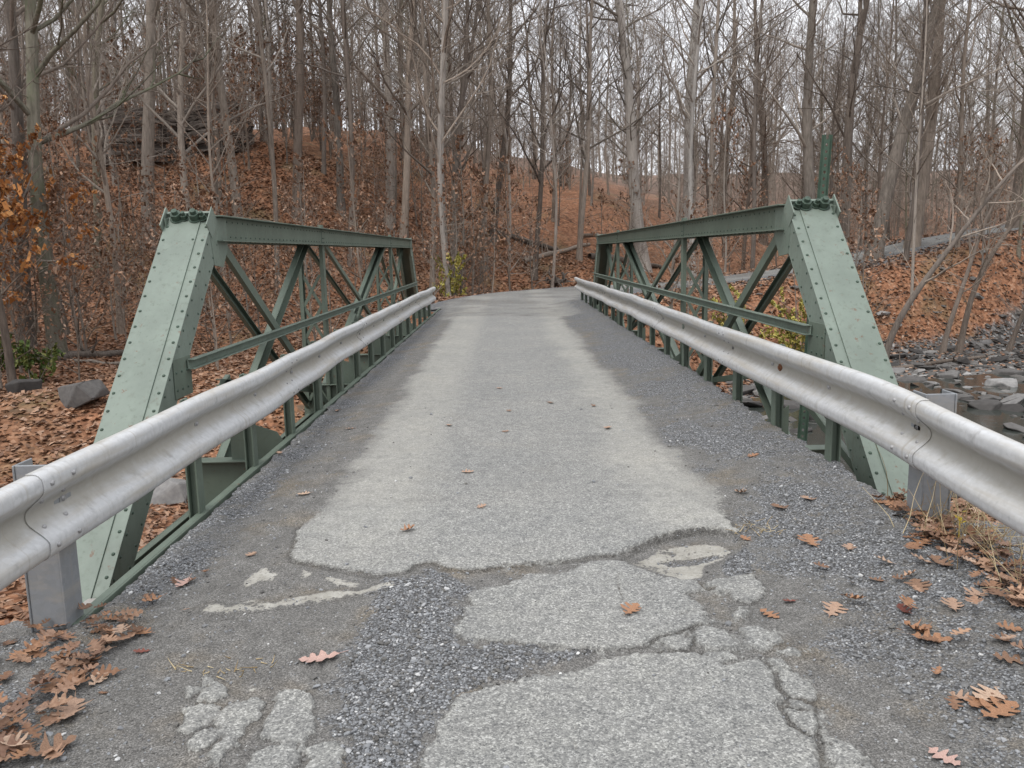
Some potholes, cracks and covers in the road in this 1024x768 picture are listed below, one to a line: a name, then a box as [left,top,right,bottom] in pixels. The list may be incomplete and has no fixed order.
crack [168,673,313,768]
pothole [620,527,746,582]
crack [446,581,742,705]
crack [285,551,625,606]
crack [759,658,833,768]
